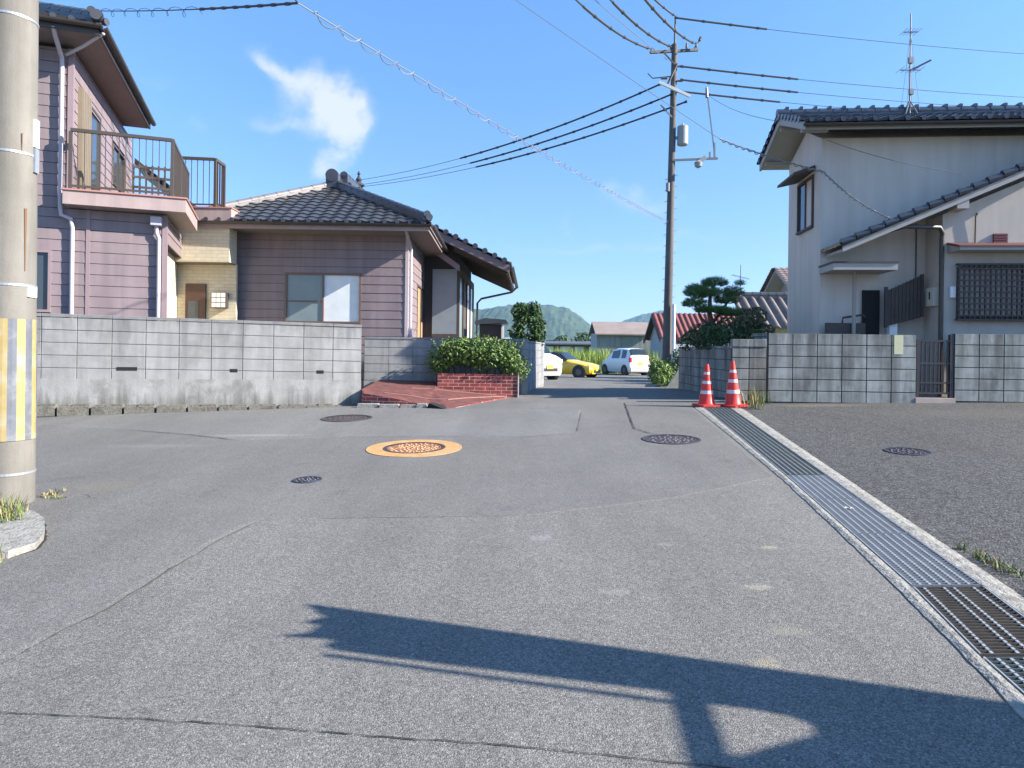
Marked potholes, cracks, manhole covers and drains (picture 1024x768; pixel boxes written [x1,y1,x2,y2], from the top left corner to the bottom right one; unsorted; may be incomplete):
drain grate [983,657,1024,696]
manhole cover [884,447,933,456]
drain grate [786,475,859,499]
manhole cover [366,440,462,457]
drain grate [913,586,1024,659]
drain grate [853,533,981,588]
manhole cover [292,476,322,484]
manhole cover [642,434,701,445]
drain grate [712,414,754,424]
drain grate [760,453,826,475]
drain grate [813,498,908,535]
drain grate [724,424,771,436]
